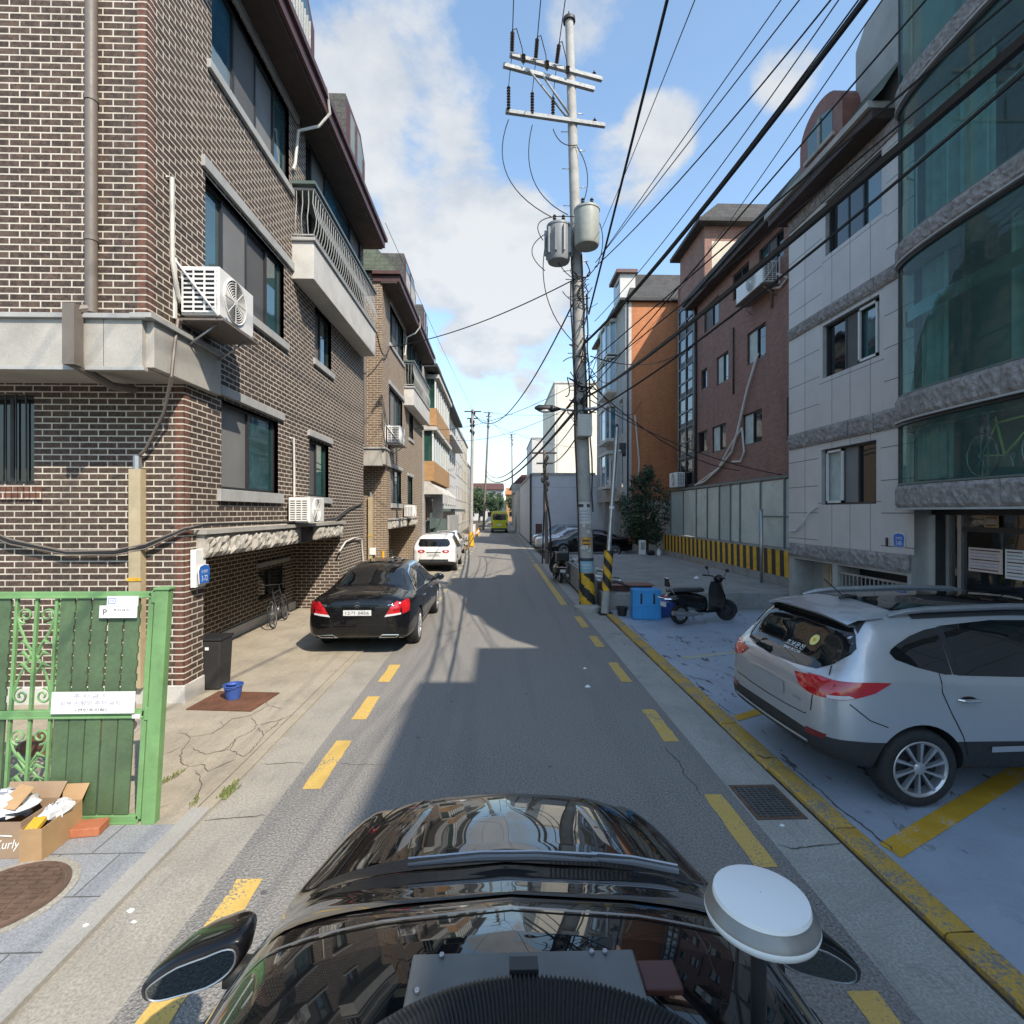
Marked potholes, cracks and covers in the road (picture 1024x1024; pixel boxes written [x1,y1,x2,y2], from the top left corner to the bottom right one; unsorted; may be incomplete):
crack [162,702,287,808]
crack [664,746,701,796]
drain grate [728,784,808,820]
manhole cover [0,857,81,934]
